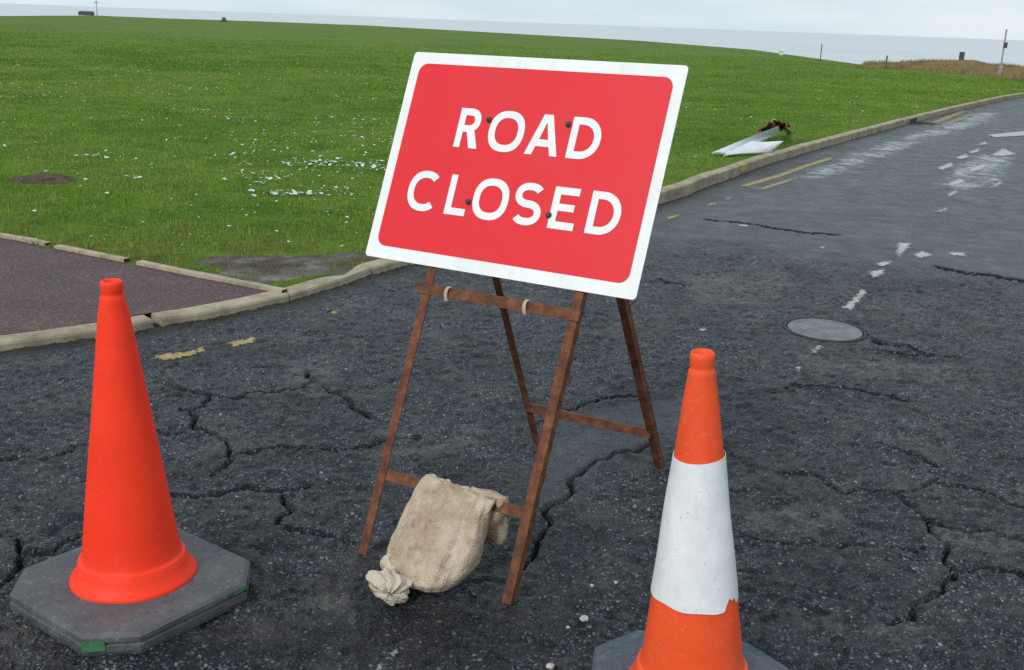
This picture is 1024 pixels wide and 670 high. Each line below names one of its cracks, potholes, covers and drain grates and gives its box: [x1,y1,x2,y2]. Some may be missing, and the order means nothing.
crack [306,374,370,419]
manhole cover [783,317,868,343]
crack [523,451,642,571]
crack [778,474,998,622]
crack [872,341,932,357]
crack [8,539,62,583]
crack [214,489,346,545]
crack [181,391,379,468]
